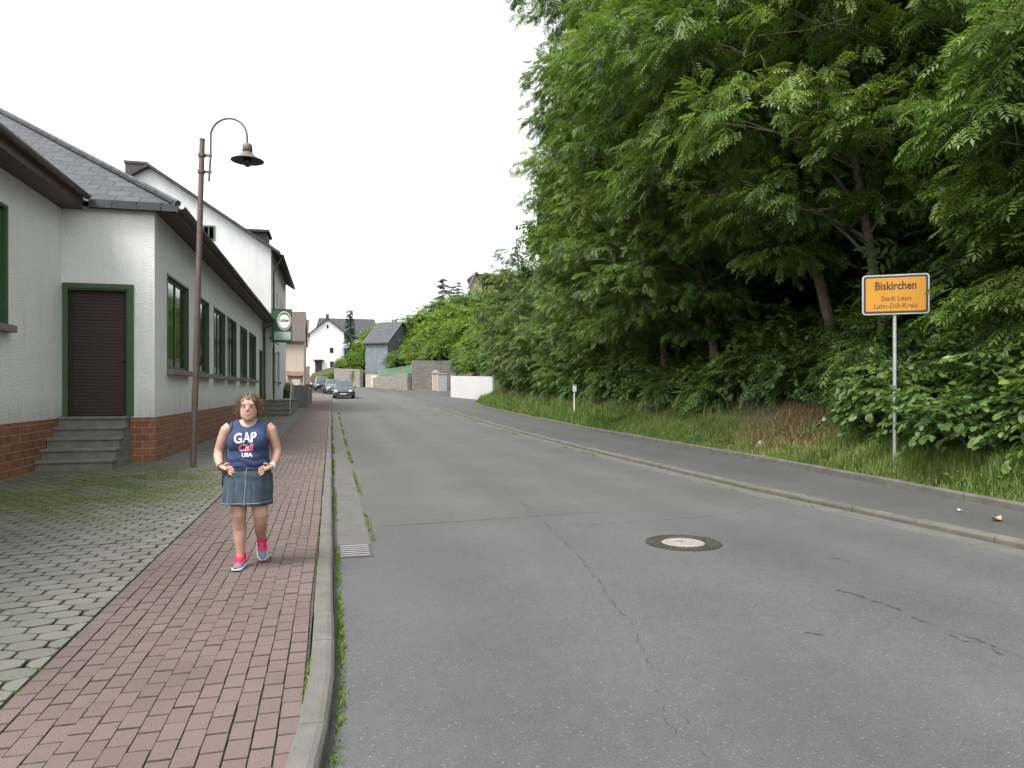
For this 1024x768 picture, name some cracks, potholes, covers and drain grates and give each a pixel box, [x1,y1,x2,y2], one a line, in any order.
drain grate [337,544,374,559]
manhole cover [645,534,722,551]
crack [836,589,1023,659]
crack [502,488,767,767]
